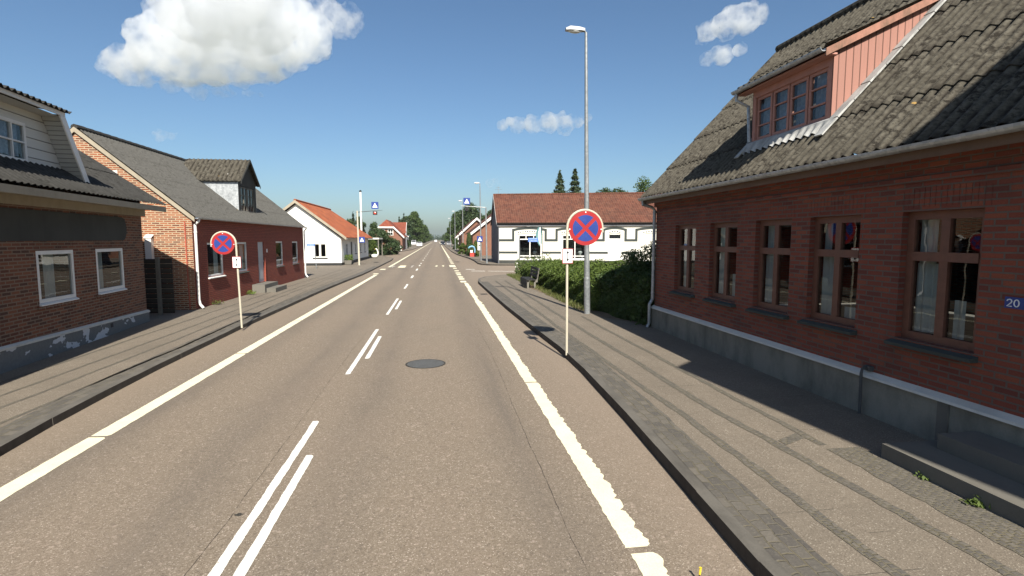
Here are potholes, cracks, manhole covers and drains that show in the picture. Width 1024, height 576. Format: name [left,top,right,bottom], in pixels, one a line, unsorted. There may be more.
manhole cover [405,359,446,368]
